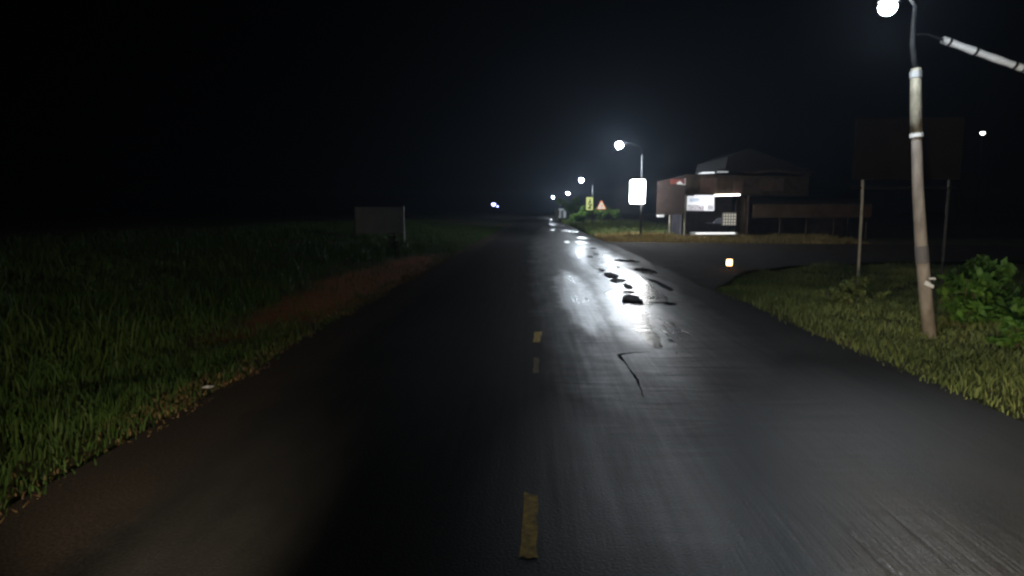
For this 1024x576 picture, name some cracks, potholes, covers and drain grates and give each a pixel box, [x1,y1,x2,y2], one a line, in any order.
pothole [577,249,668,307]
crack [617,352,644,397]
